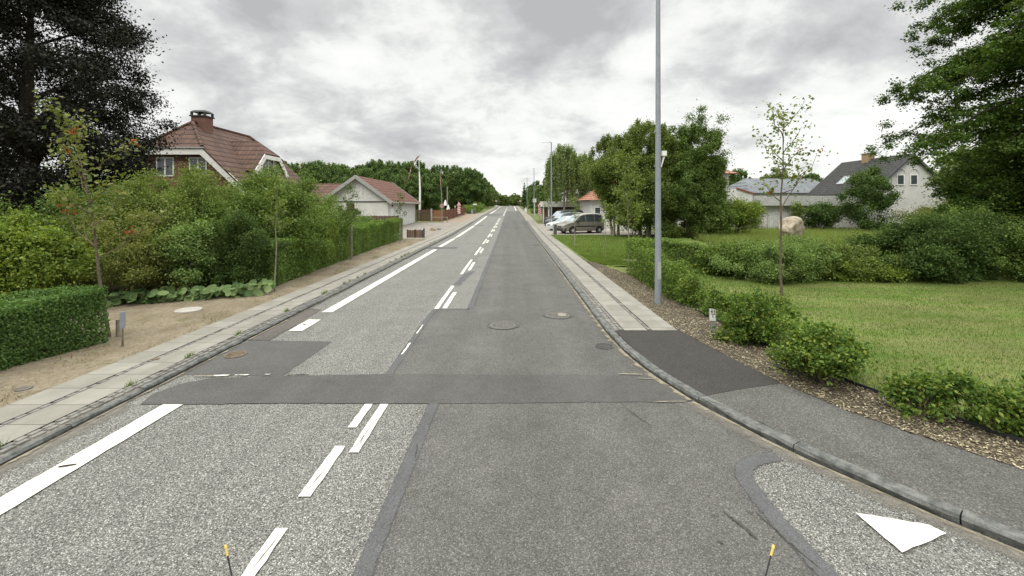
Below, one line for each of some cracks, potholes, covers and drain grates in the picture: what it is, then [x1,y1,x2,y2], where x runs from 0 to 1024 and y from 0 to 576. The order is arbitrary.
manhole cover [543,311,573,319]
crack [711,509,820,568]
manhole cover [487,320,519,330]
